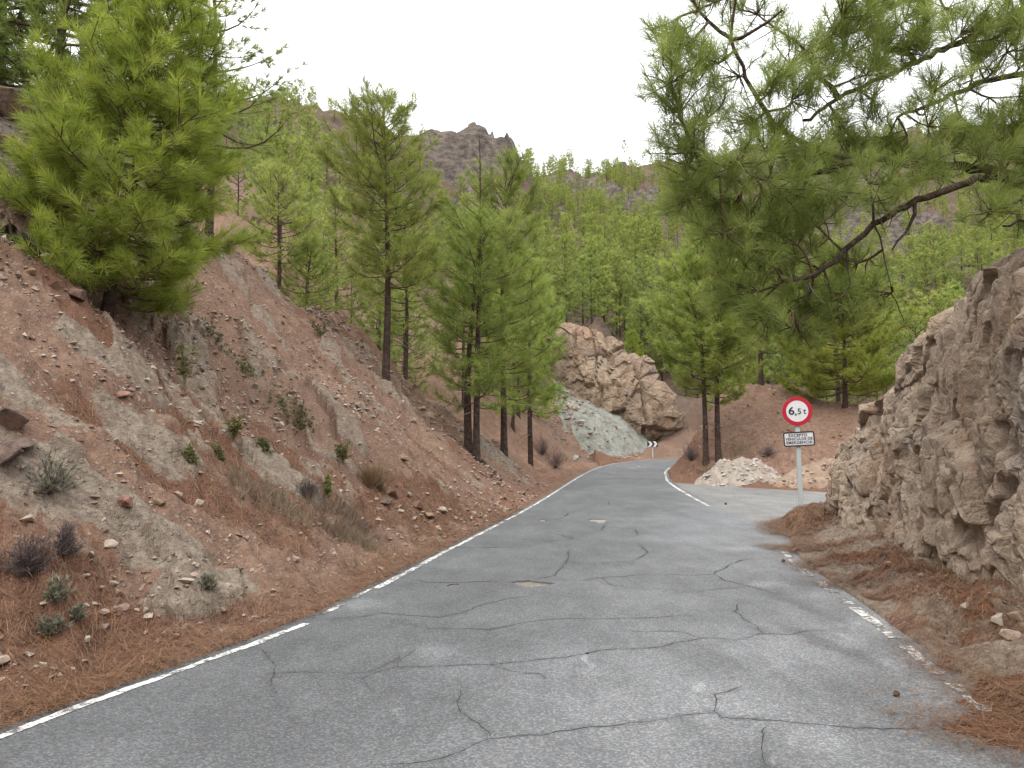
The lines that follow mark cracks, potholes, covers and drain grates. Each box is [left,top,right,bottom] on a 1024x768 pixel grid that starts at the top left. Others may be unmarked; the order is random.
crack [387,686,915,766]
crack [263,513,804,686]
pothole [512,580,554,588]
